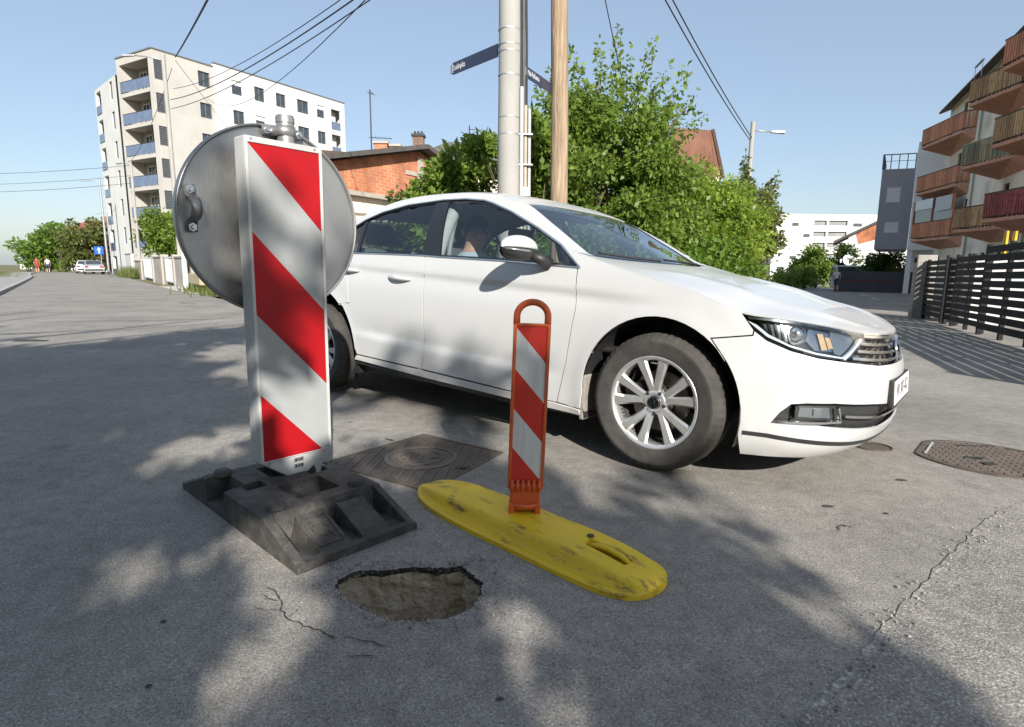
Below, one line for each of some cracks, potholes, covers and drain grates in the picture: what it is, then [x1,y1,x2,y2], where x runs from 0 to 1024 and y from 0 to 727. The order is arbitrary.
pothole [335,566,484,621]
manhole cover [915,440,1024,480]
manhole cover [856,441,893,452]
crack [260,588,387,657]
manhole cover [323,434,504,490]
